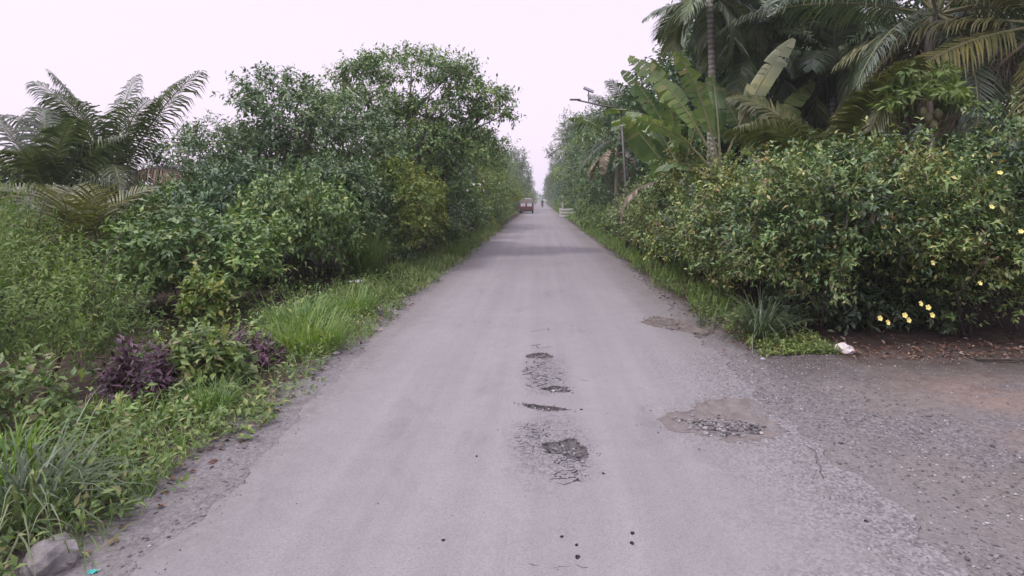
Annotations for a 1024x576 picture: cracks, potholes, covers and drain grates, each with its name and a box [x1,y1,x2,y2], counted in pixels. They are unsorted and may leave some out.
pothole [537,385,574,393]
pothole [526,351,554,360]
pothole [637,313,720,337]
pothole [514,402,576,413]
pothole [535,432,601,463]
pothole [629,389,799,450]
